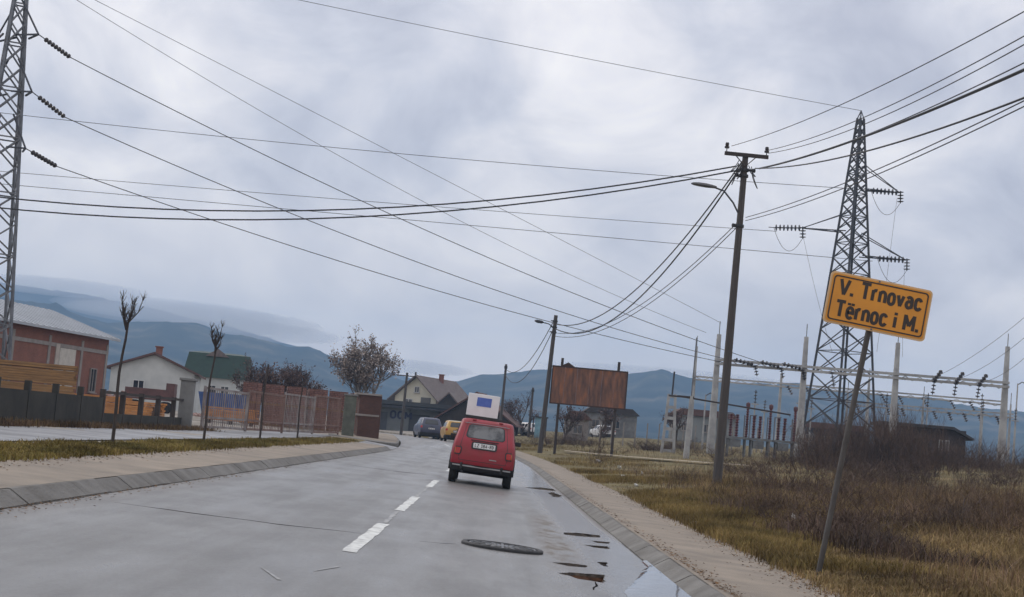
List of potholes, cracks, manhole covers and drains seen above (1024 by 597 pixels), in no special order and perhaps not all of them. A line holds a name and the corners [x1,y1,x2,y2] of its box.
manhole cover [461,539,543,555]
pothole [560,572,606,583]
